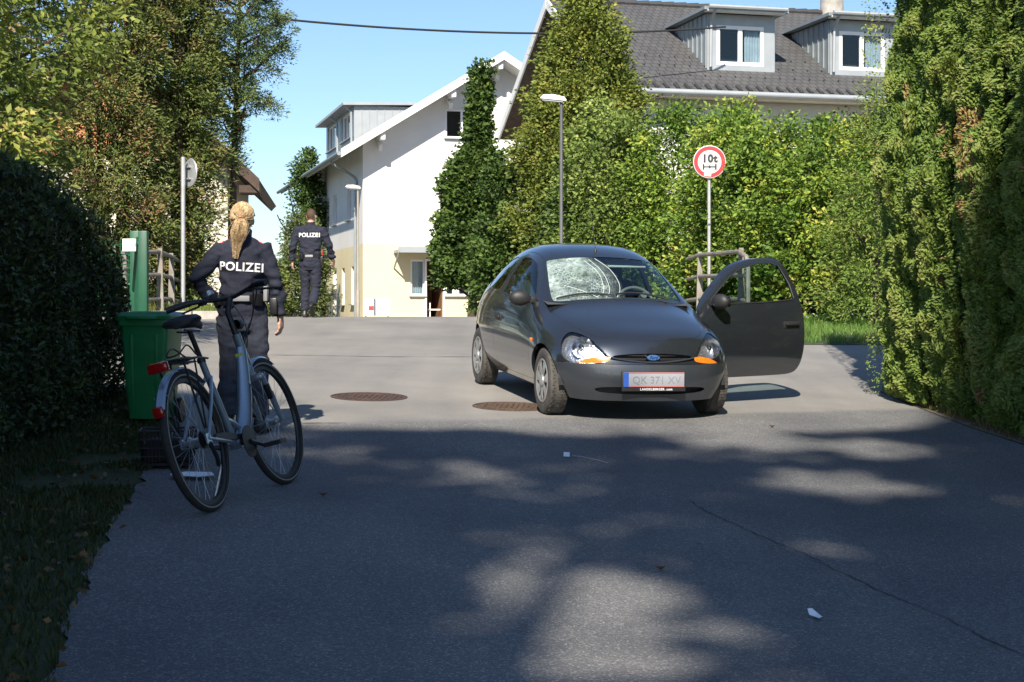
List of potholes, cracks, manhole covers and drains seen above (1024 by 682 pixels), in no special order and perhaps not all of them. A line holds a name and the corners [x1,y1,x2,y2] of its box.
manhole cover [330,392,408,401]
crack [689,499,1022,654]
manhole cover [472,402,540,411]
